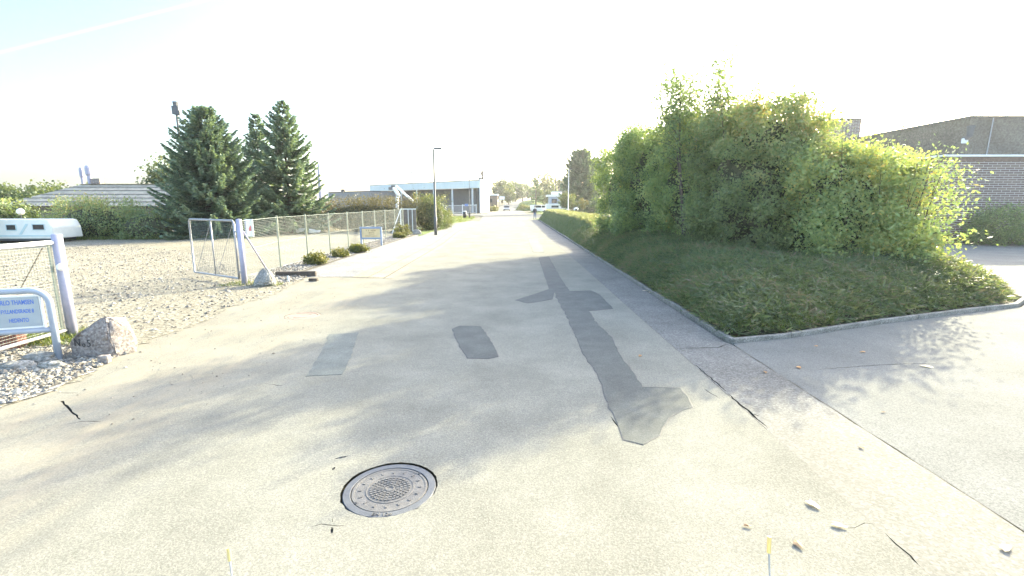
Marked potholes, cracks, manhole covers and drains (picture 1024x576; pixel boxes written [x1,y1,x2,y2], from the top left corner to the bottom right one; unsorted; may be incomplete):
manhole cover [342,464,436,517]
crack [675,344,767,430]
crack [854,523,917,563]
crack [63,401,96,424]
